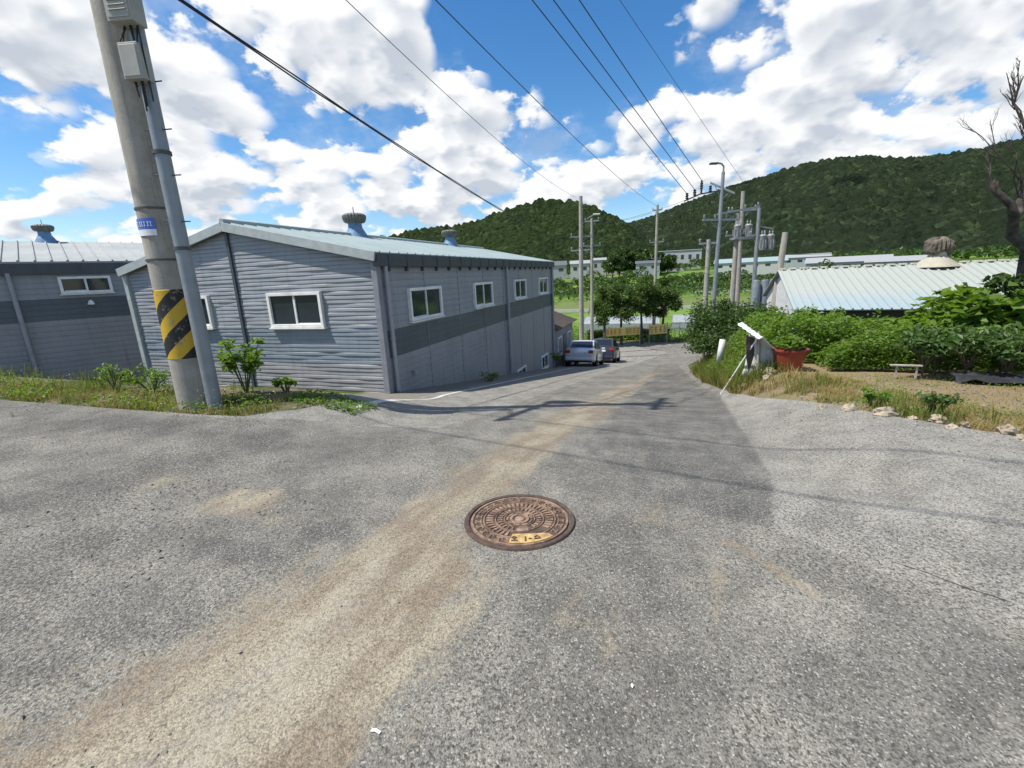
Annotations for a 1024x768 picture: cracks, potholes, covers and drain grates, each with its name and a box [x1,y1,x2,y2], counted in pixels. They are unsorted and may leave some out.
crack [897,563,1010,602]
manhole cover [464,494,575,552]
